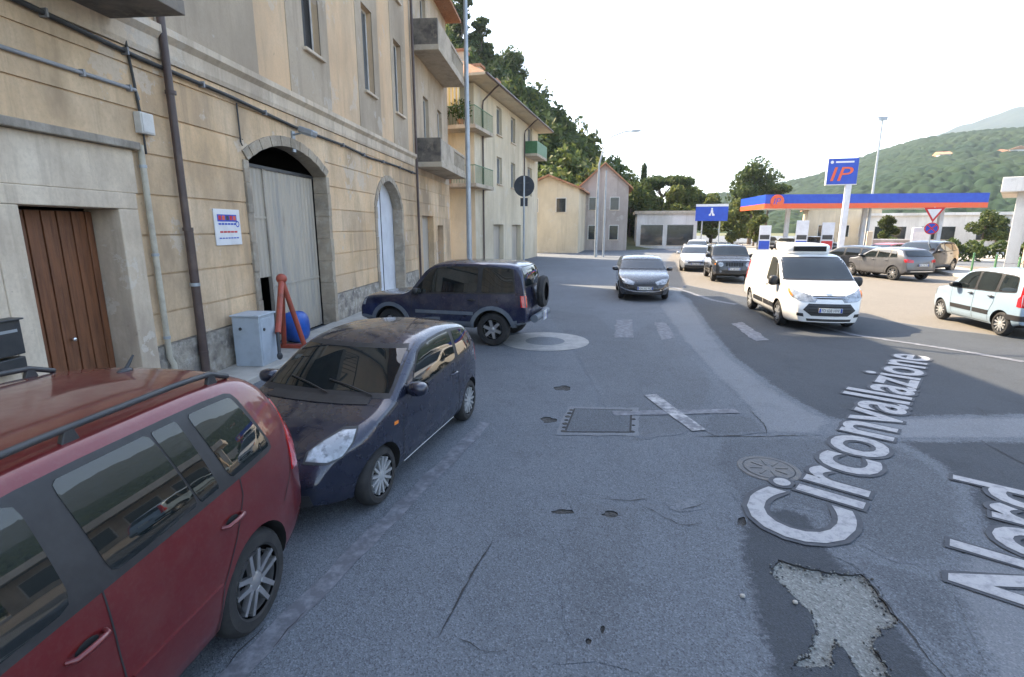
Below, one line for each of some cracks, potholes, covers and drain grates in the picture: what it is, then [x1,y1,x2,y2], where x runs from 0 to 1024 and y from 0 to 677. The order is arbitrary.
pothole [769,560,901,677]
manhole cover [737,456,802,481]
manhole cover [556,406,640,436]
crack [605,498,705,525]
crack [440,543,506,652]
